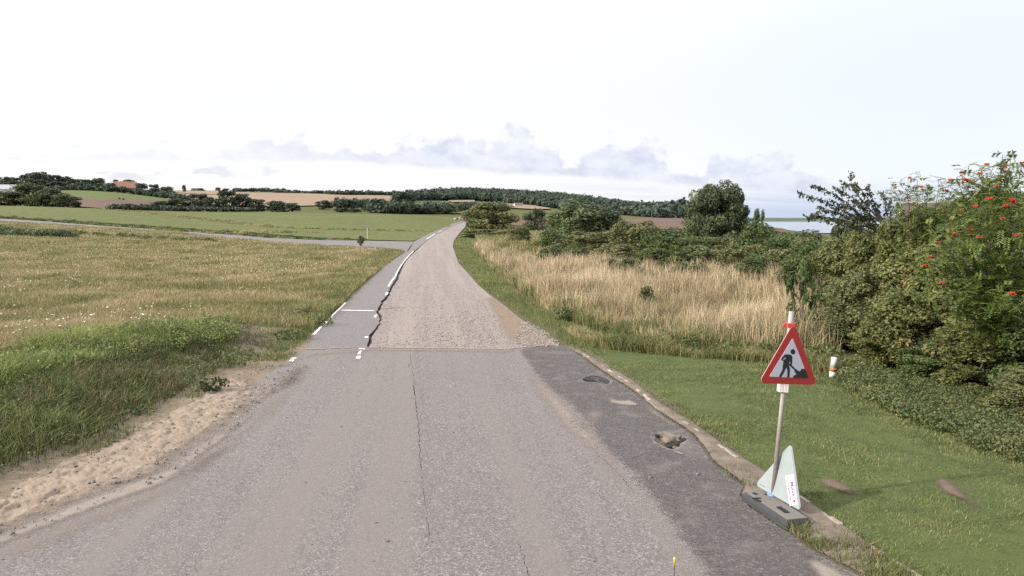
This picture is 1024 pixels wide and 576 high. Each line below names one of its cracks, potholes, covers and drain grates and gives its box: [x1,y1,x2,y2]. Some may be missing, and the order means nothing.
crack [367,250,416,348]
pothole [654,432,686,454]
crack [408,351,430,540]
